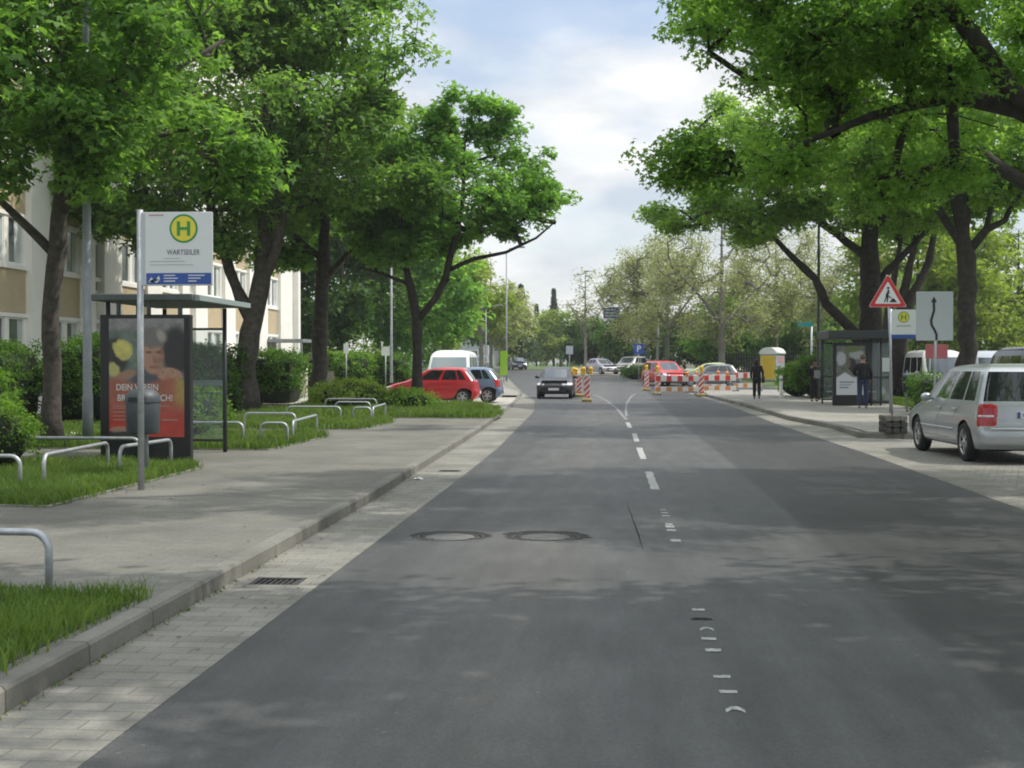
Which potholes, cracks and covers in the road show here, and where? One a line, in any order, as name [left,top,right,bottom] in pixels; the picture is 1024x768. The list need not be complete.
manhole cover [503,531,591,541]
manhole cover [410,531,491,541]
drain grate [247,577,307,585]
